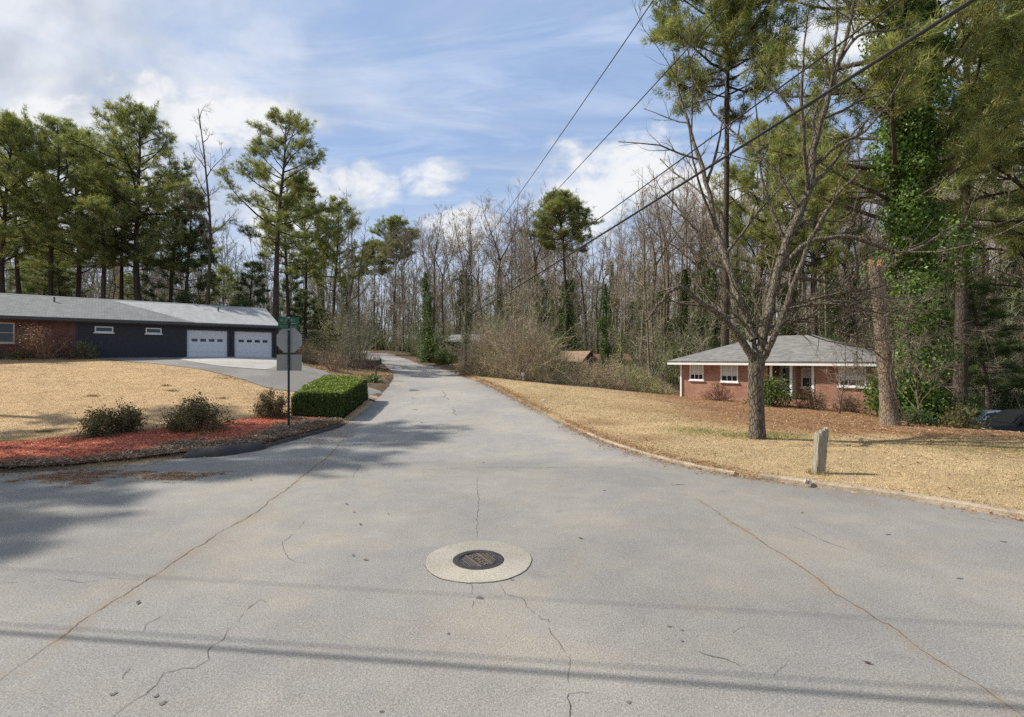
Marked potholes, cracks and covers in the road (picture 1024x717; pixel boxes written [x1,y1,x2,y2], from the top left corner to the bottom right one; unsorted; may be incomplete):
manhole cover [425,541,532,584]
crack [4,436,346,677]
crack [501,586,593,717]
crack [114,599,264,715]
